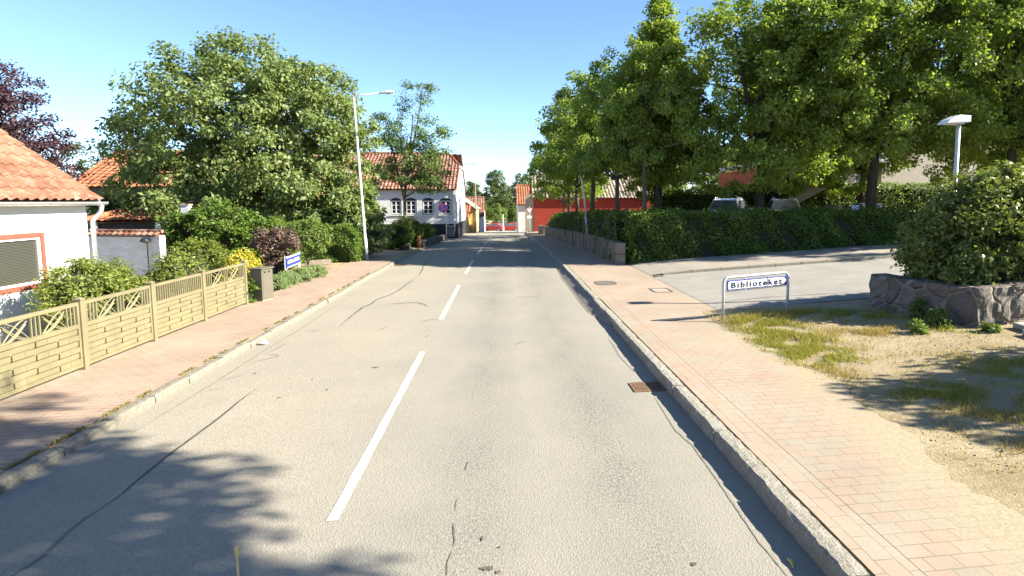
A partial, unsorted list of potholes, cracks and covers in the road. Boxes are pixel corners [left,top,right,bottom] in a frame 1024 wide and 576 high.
crack [446,500,457,576]
crack [655,398,788,576]
crack [11,506,104,576]
drain grate [628,381,666,392]
